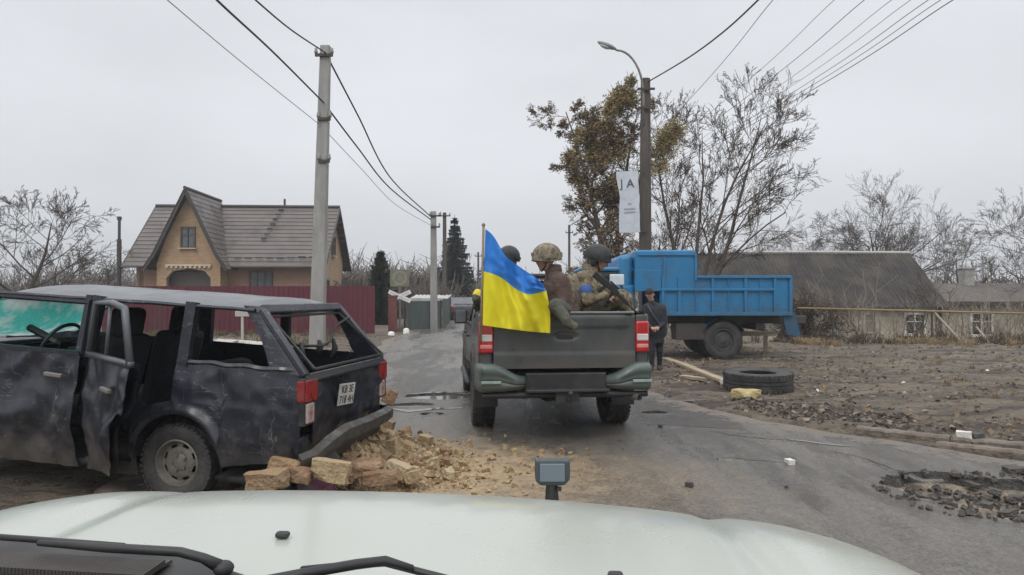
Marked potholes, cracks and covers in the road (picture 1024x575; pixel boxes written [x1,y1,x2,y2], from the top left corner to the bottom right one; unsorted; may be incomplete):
pothole [401,392,470,401]
pothole [871,470,1024,526]
